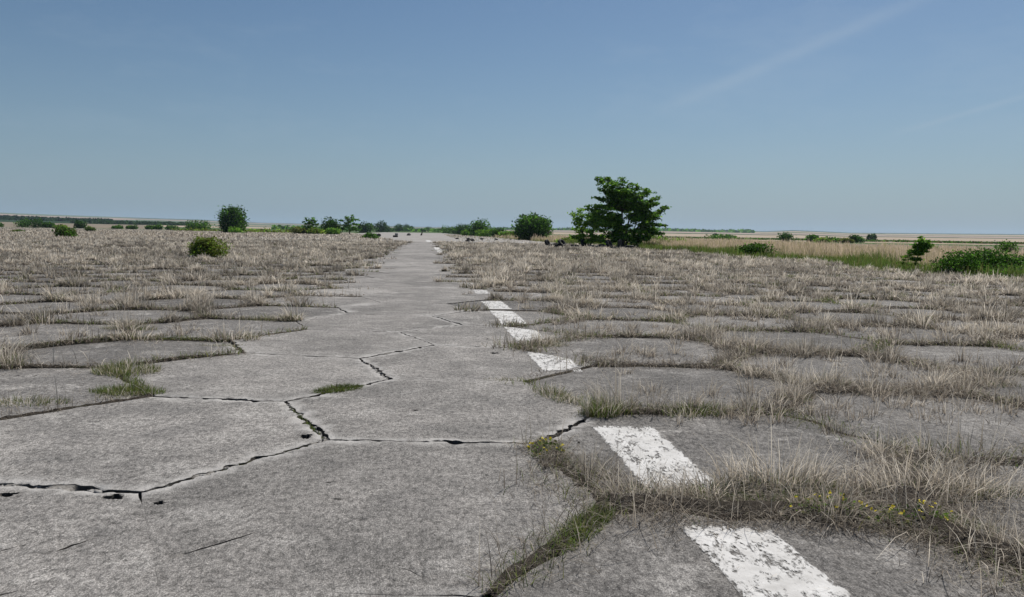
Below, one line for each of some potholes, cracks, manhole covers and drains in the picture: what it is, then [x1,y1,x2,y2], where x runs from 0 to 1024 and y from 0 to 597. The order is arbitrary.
crack [163,533,252,561]
crack [0,310,587,503]
